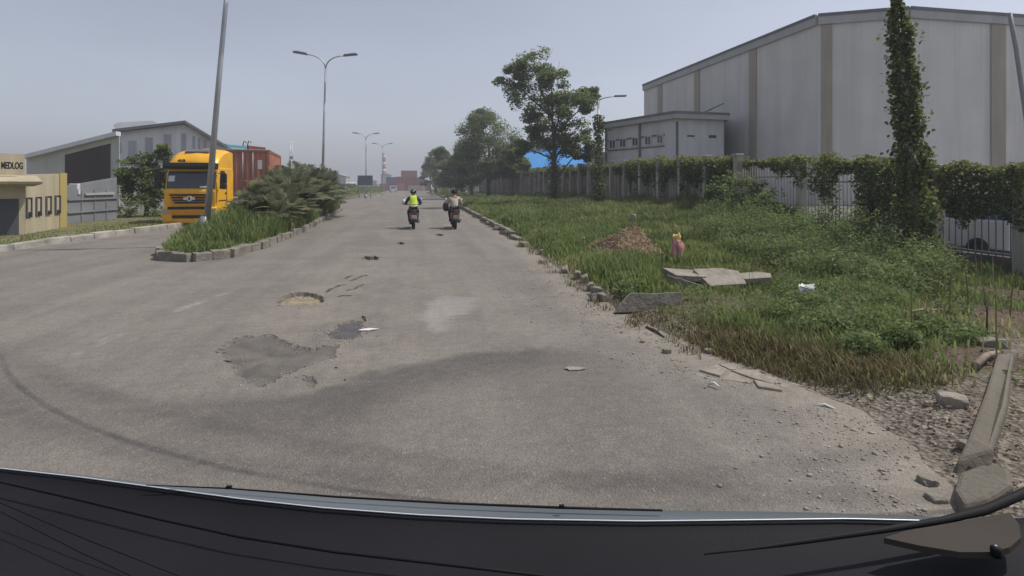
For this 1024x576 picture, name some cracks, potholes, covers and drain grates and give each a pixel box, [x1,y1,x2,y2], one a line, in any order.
pothole [324,320,364,340]
crack [325,275,368,297]
pothole [276,292,325,306]
